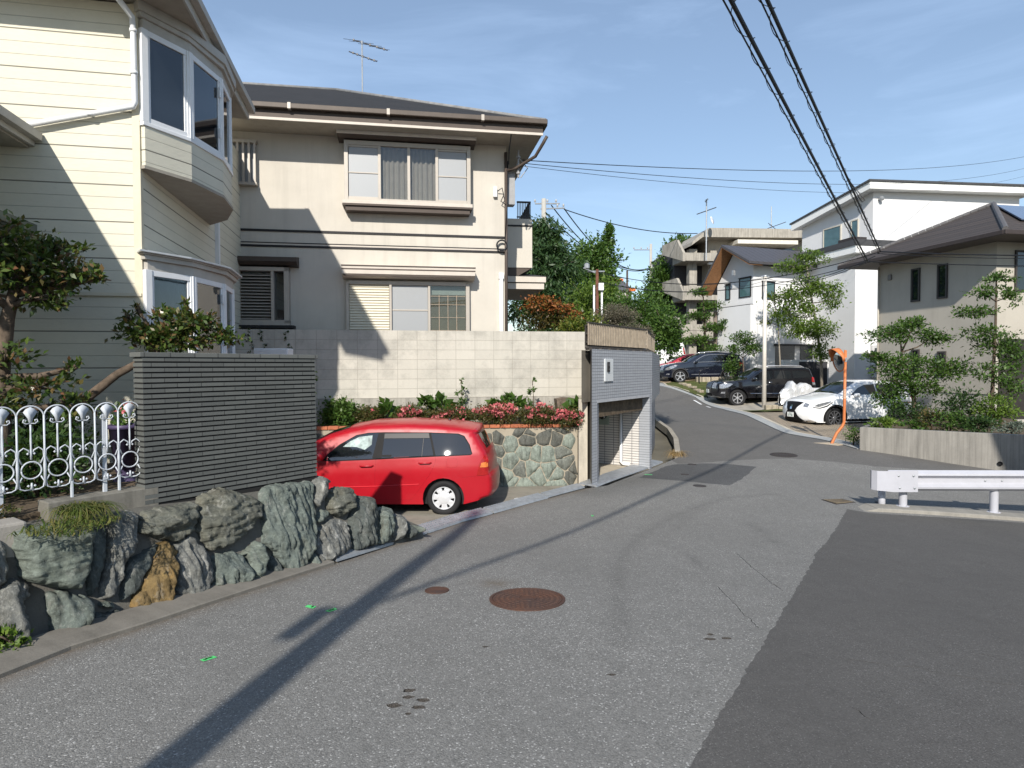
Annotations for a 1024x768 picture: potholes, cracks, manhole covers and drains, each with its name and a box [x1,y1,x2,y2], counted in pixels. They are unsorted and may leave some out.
manhole cover [489,588,565,611]
manhole cover [425,586,449,594]
